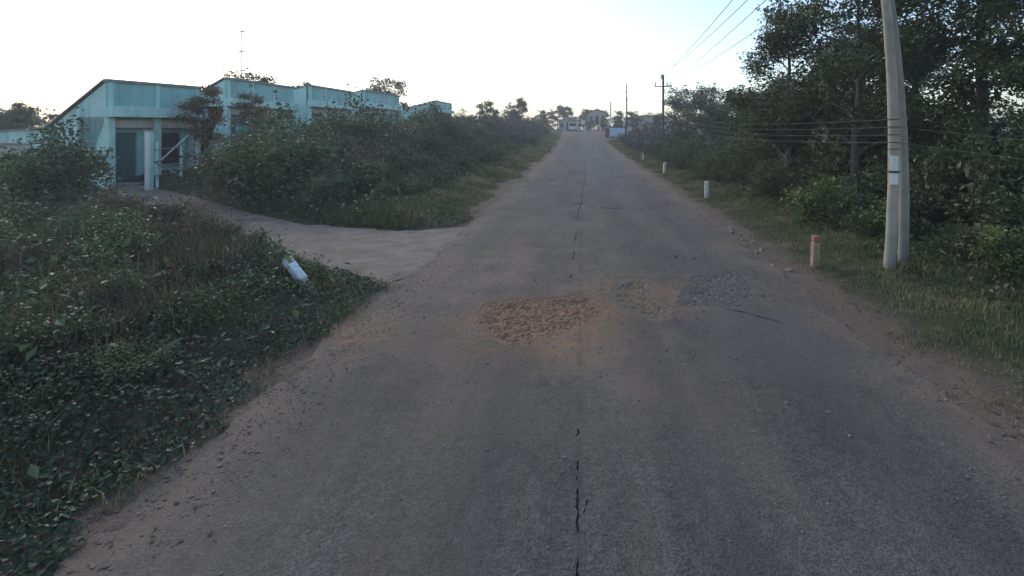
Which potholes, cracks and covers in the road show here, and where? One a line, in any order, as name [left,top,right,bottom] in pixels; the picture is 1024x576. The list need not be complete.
crack [670,263,812,324]
pothole [578,268,701,341]
crack [575,429,588,576]
